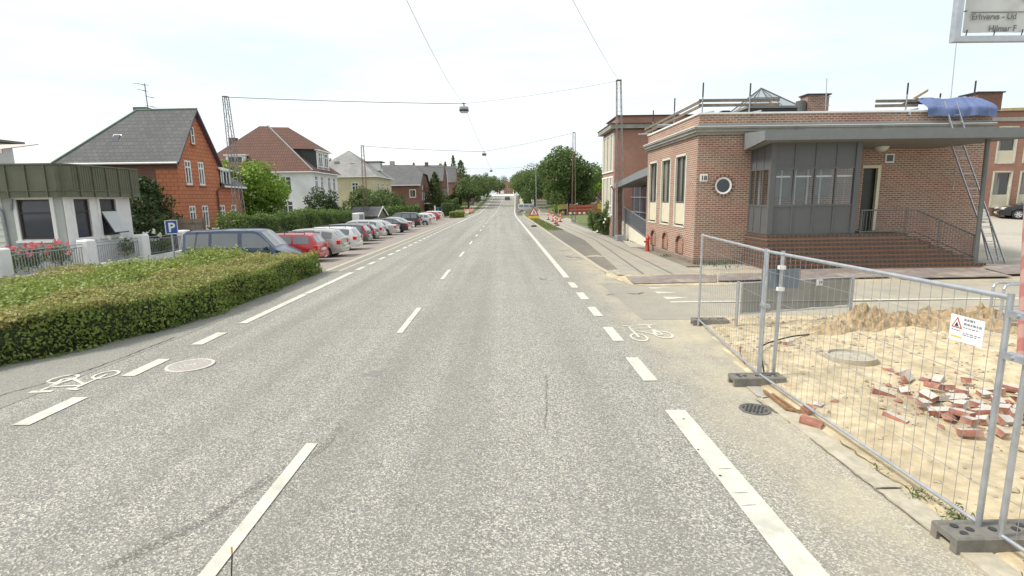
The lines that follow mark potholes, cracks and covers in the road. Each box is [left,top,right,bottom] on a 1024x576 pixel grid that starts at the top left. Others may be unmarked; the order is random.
drain grate [739,403,771,416]
manhole cover [164,358,215,373]
manhole cover [824,348,878,367]
